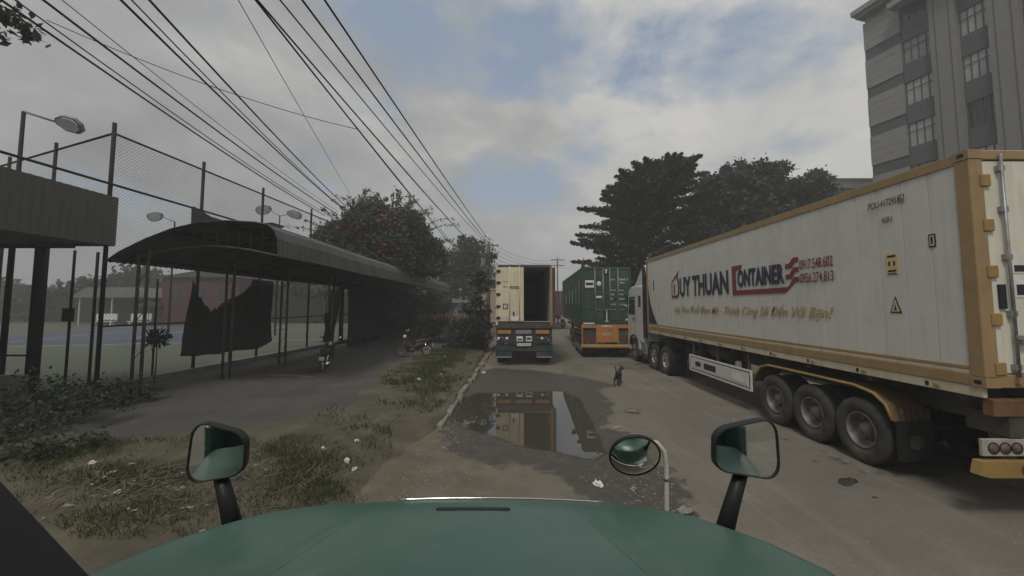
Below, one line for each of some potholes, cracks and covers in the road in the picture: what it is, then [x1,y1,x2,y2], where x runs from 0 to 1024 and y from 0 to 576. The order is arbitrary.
pothole [838,478,858,486]
